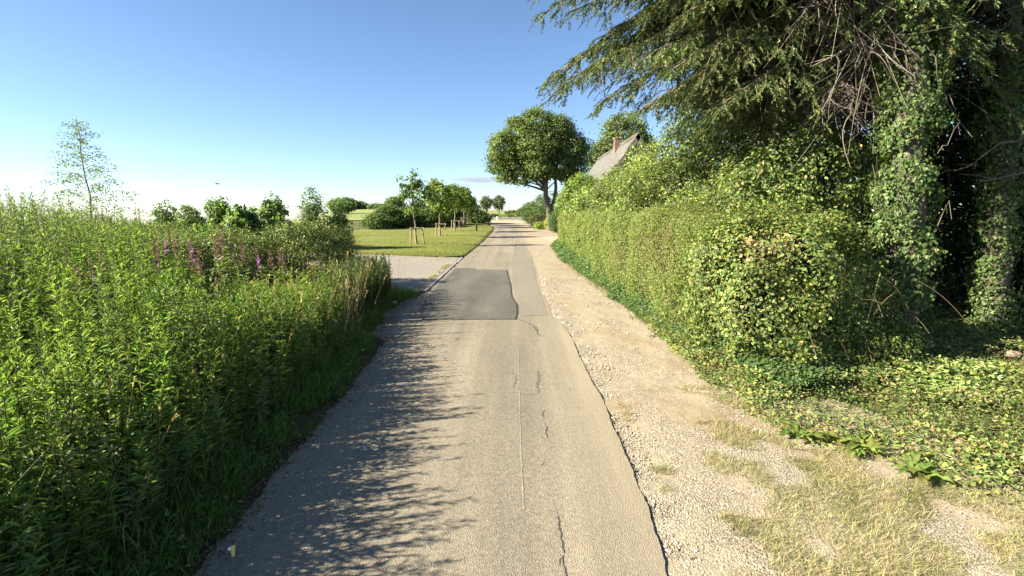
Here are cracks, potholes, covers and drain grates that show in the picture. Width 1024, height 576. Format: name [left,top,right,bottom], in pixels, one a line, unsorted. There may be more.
crack [556,510,567,576]
